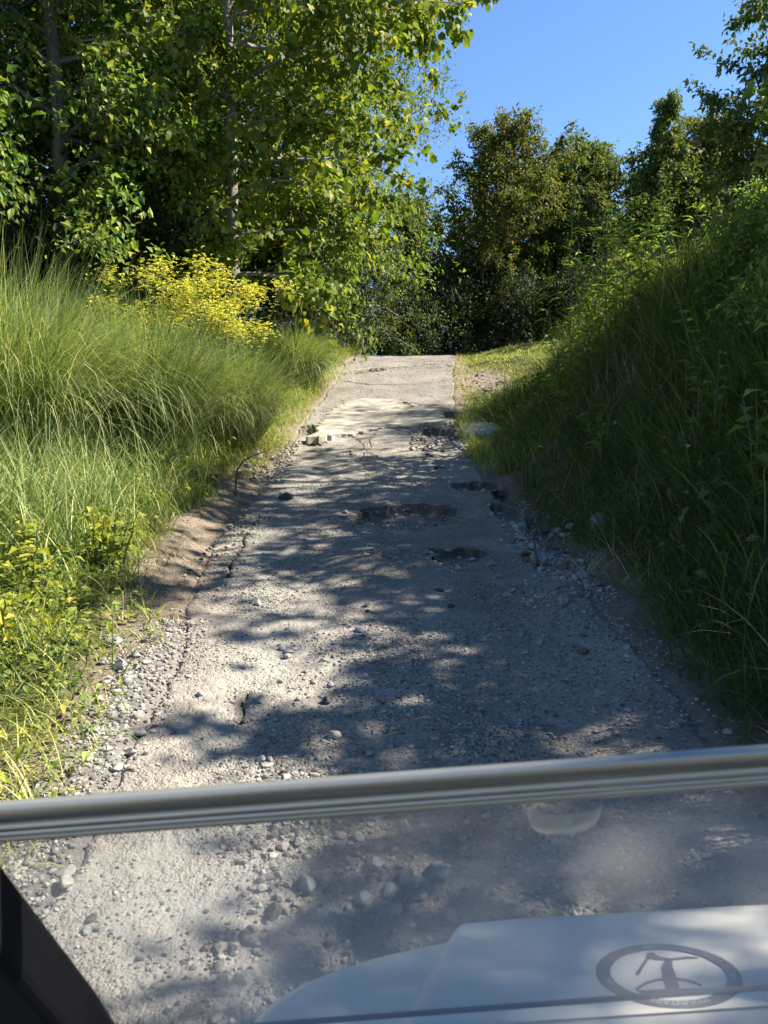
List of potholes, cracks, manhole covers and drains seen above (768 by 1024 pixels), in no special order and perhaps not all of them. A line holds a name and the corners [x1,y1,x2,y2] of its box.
pothole [487,501,527,528]
crack [339,433,379,459]
pothole [416,547,494,571]
crack [221,517,264,578]
pothole [446,481,504,496]
pothole [415,427,465,446]
crack [232,691,256,725]
pothole [330,501,473,533]
